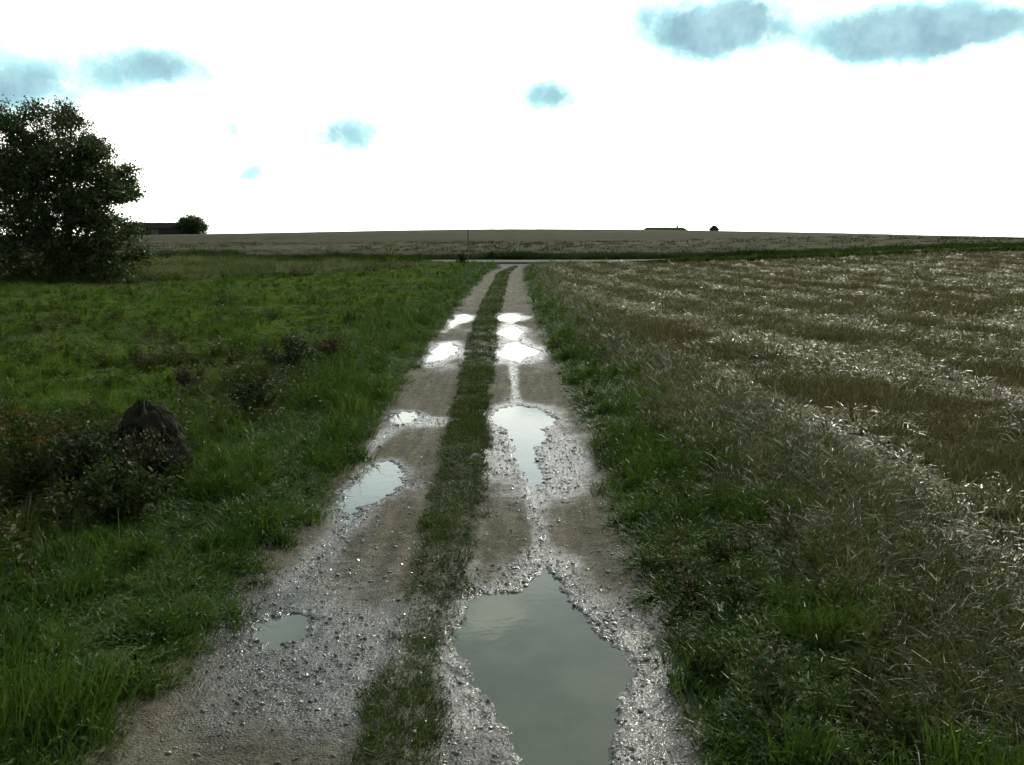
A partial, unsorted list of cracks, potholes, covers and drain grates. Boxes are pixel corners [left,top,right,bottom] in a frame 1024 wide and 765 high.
pothole [448,314,474,329]
pothole [441,564,645,765]
pothole [495,313,524,322]
pothole [421,341,460,366]
pothole [488,404,560,493]
pothole [492,325,526,340]
pothole [491,341,544,363]
pothole [334,459,410,524]
pothole [245,609,318,650]
pothole [385,410,423,424]
